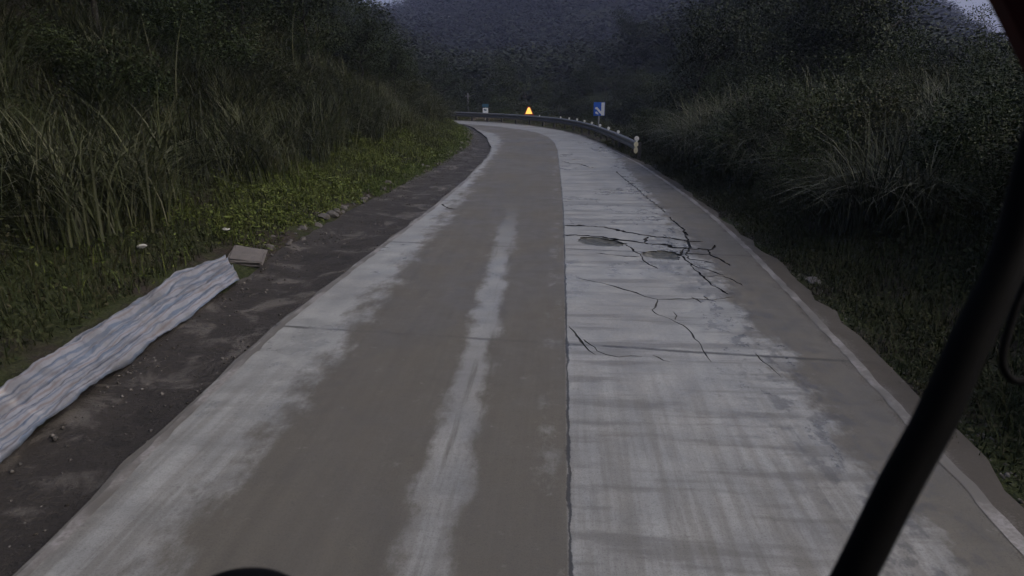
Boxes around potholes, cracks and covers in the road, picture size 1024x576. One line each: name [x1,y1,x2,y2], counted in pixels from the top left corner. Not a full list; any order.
pothole [642,250,681,260]
crack [565,171,743,360]
pothole [578,237,628,247]
